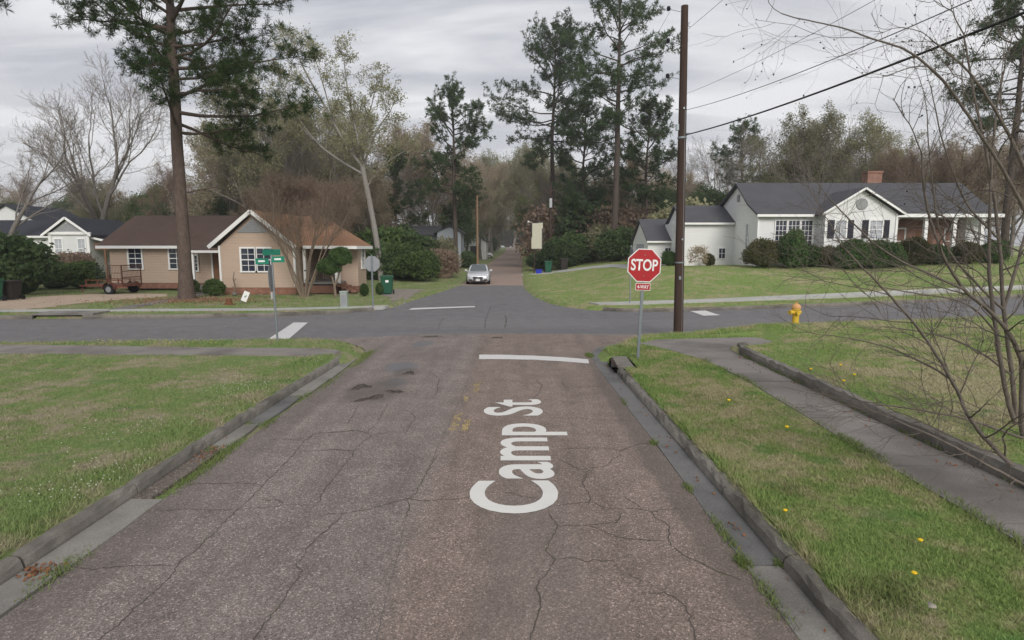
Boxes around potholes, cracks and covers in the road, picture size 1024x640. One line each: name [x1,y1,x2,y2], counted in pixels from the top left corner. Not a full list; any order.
crack [530,443,746,640]
crack [81,404,535,640]
drain grate [594,356,637,373]
